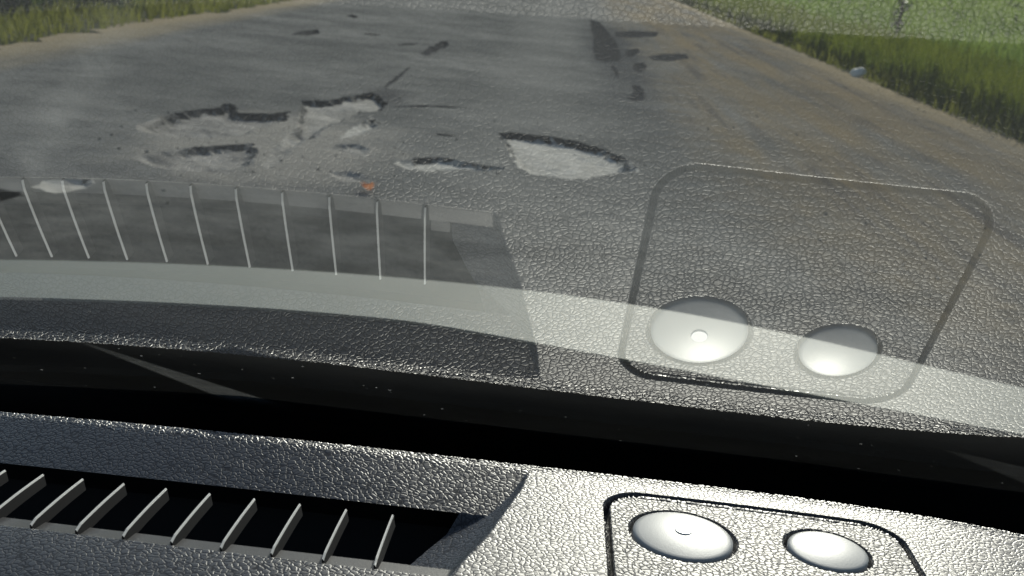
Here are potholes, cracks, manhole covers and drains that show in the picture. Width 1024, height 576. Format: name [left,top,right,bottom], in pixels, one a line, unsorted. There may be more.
pothole [135,102,291,138]
pothole [132,143,259,174]
crack [384,67,410,87]
pothole [394,157,508,172]
pothole [262,92,388,168]
pothole [497,132,640,179]
